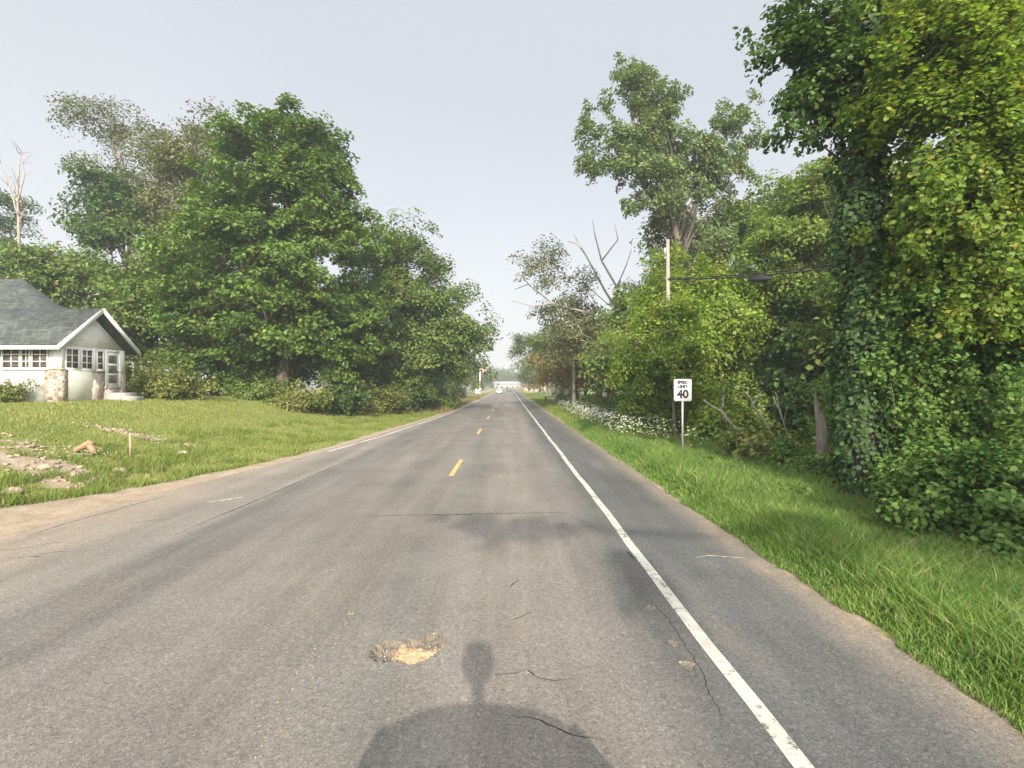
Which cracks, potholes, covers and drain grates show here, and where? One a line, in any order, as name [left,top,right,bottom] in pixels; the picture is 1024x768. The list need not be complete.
pothole [366,632,449,665]
pothole [678,661,697,670]
crack [491,669,569,681]
crack [513,715,605,741]
